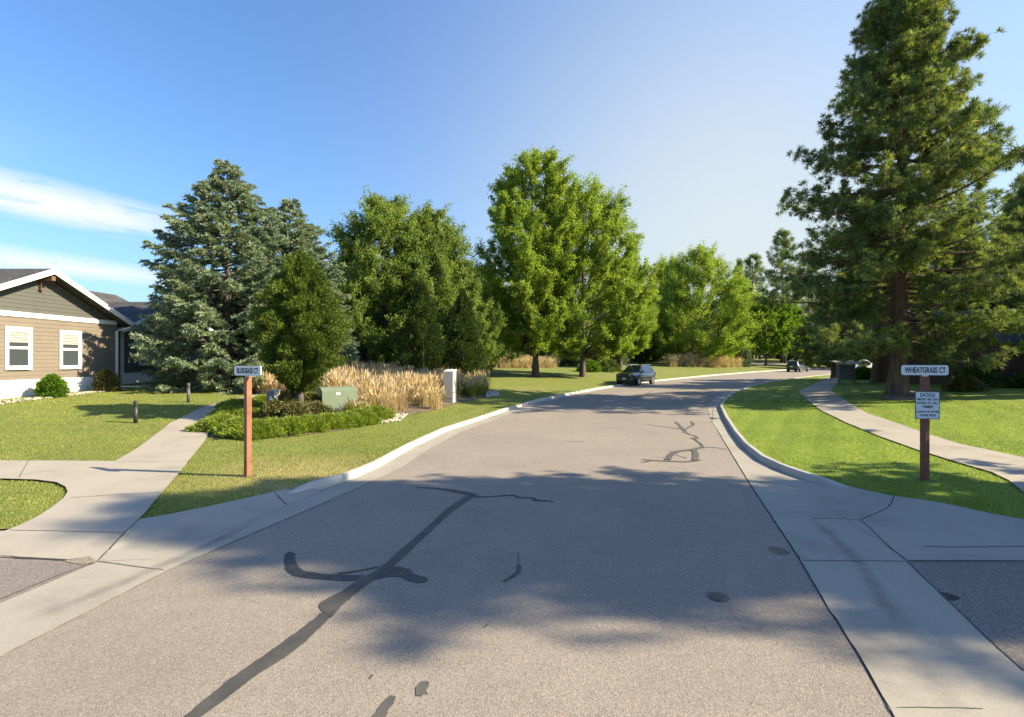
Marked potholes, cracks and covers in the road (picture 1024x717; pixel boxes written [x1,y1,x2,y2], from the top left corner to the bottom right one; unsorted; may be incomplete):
manhole cover [706,592,730,602]
